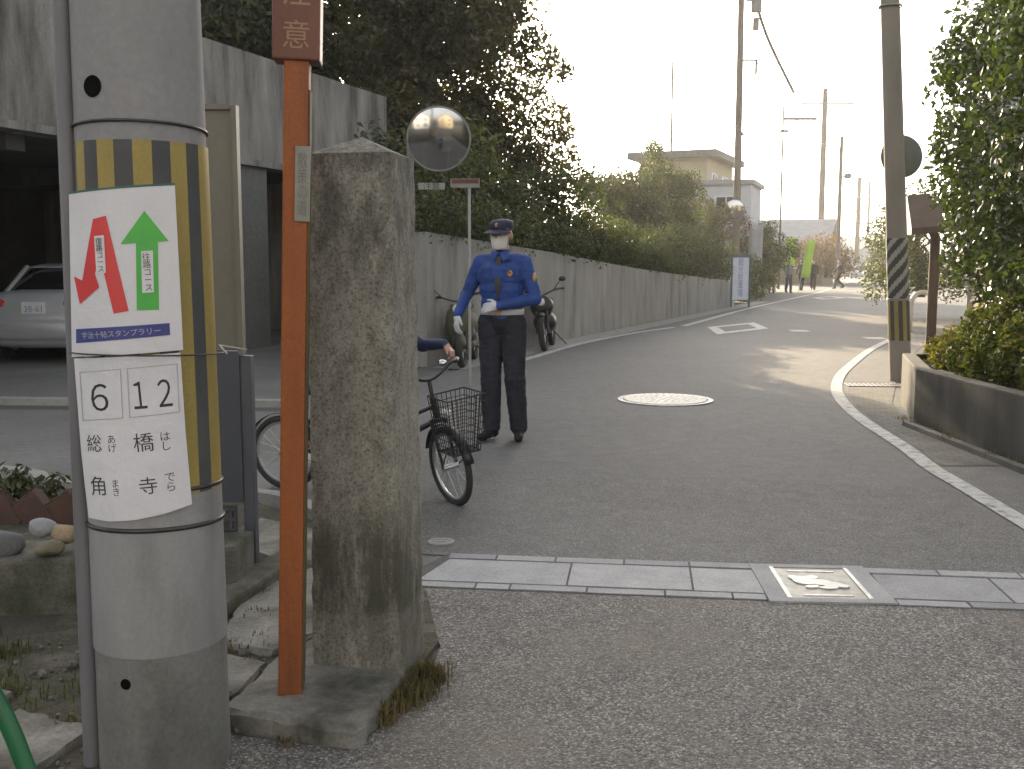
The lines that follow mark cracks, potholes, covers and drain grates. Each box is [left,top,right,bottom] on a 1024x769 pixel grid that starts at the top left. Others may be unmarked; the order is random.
utility cover [428,538,454,546]
manhole cover [749,563,898,605]
manhole cover [618,393,713,407]
